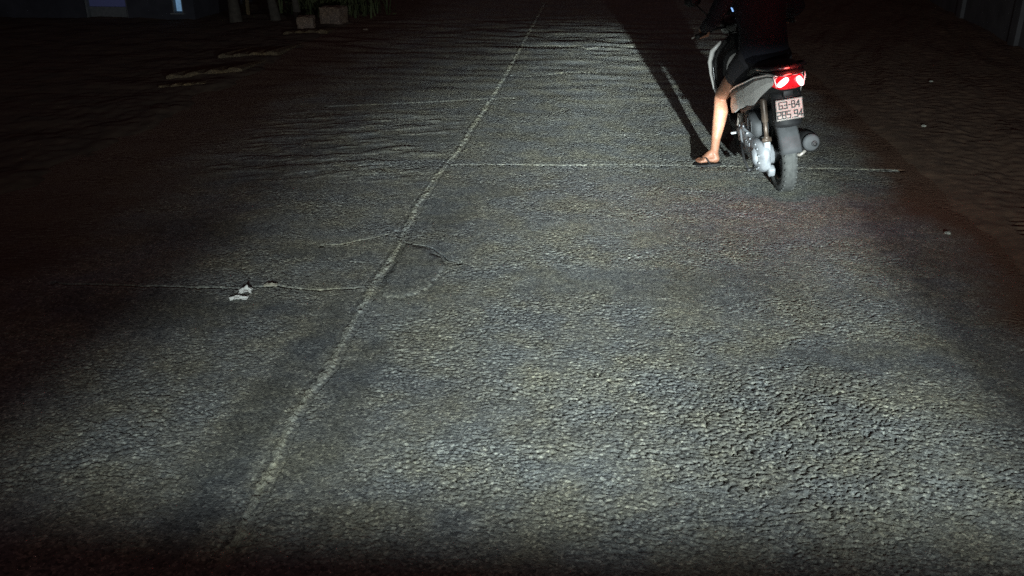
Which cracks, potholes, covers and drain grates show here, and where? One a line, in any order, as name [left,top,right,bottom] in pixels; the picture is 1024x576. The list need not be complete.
crack [203,4,546,576]
crack [54,281,365,293]
